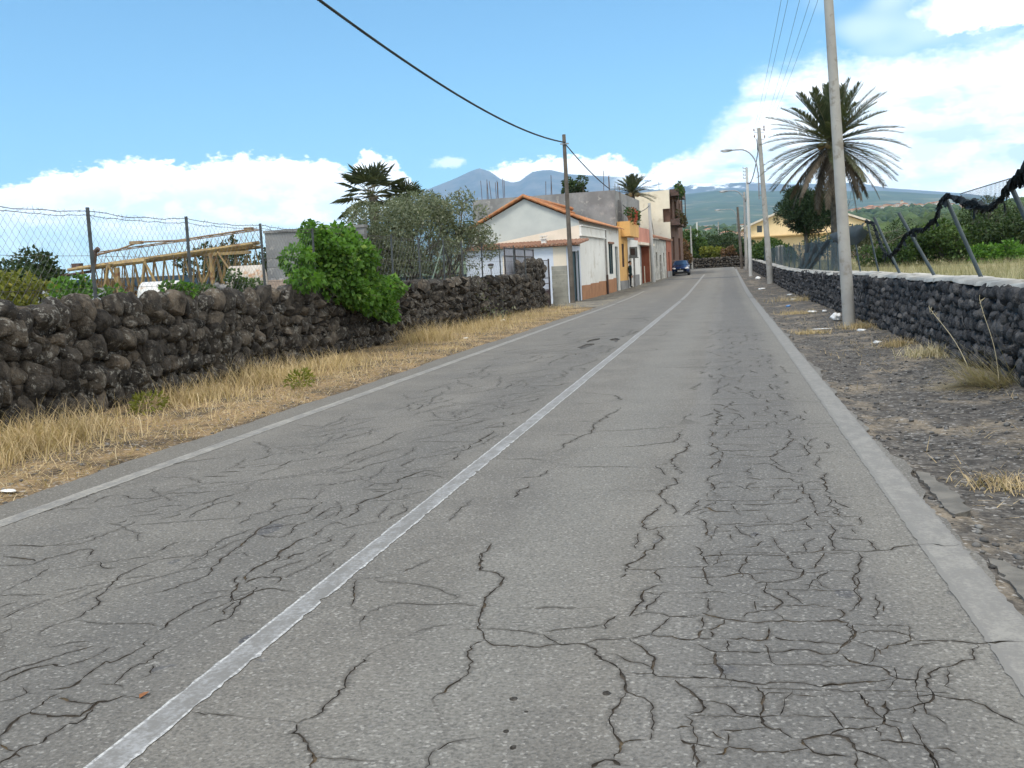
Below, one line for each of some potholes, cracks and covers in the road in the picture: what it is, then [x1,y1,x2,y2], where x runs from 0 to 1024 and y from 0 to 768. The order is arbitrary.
crack [0,641,171,763]
crack [4,319,645,646]
crack [378,414,1016,768]
